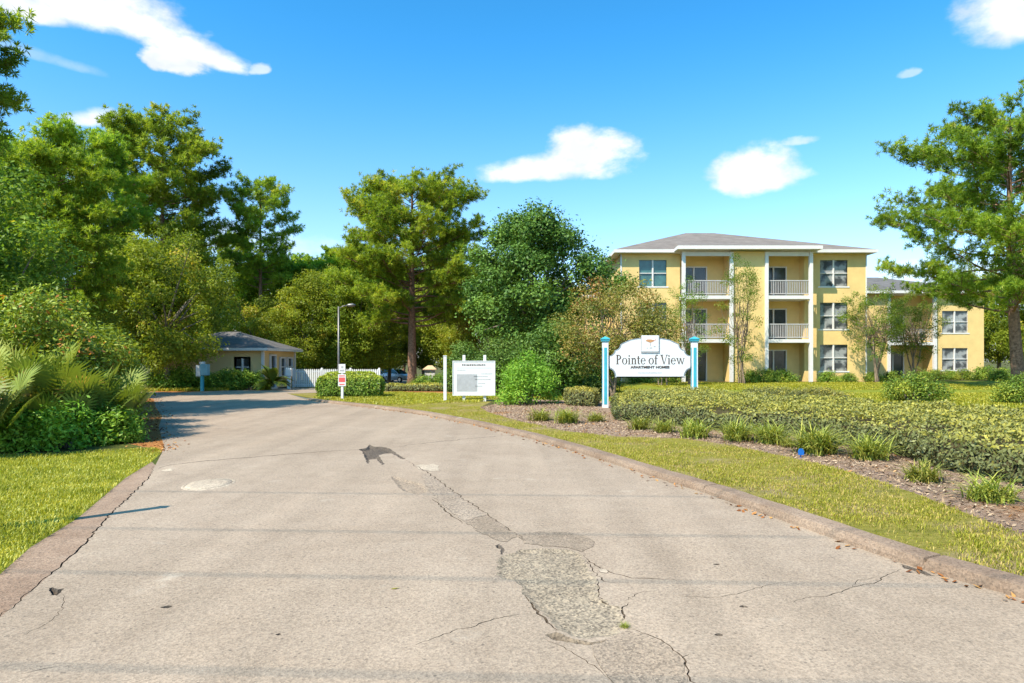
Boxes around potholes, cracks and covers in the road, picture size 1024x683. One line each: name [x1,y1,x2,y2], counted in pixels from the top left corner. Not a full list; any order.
manhole cover [181,478,236,491]
crack [416,596,608,678]
crack [794,569,900,602]
crack [584,556,695,683]
